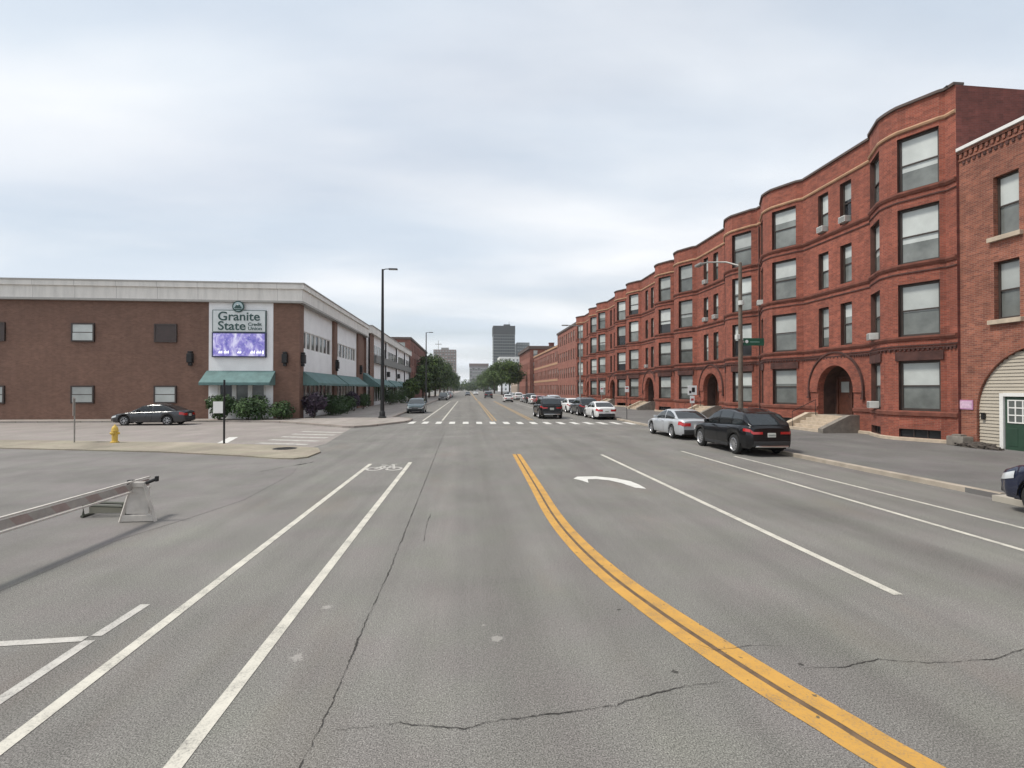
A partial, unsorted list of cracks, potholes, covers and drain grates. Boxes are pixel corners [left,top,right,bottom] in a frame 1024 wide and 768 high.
crack [337,681,722,730]
crack [299,432,445,768]
crack [808,649,1022,668]
